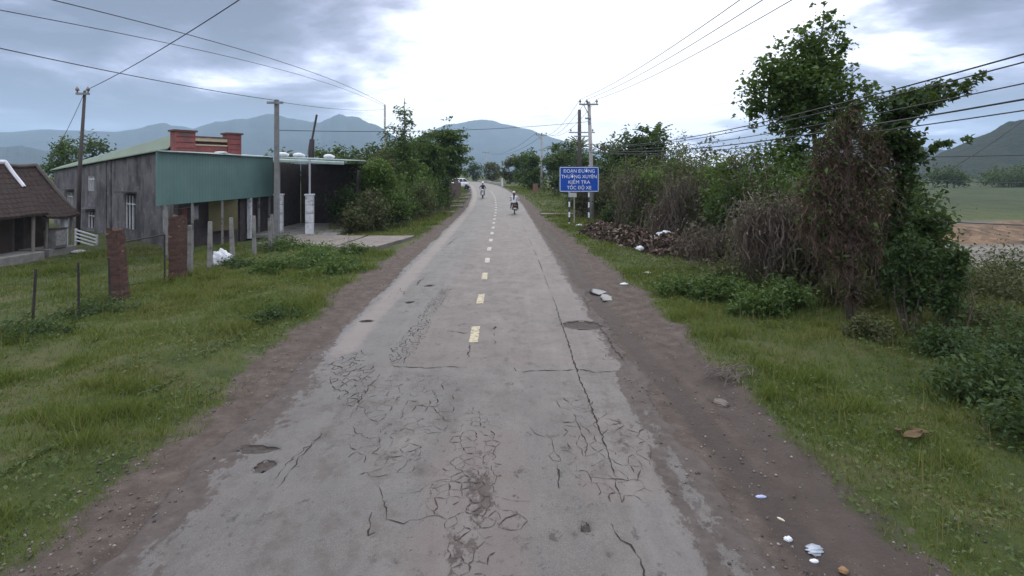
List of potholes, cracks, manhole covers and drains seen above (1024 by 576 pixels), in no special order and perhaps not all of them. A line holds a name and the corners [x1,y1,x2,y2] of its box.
crack [612,525,645,576]
crack [326,350,528,576]
crack [389,288,451,362]
crack [278,433,322,486]
pothole [251,459,278,473]
pothole [237,445,282,454]
crack [530,241,675,502]
pothole [556,320,610,330]
